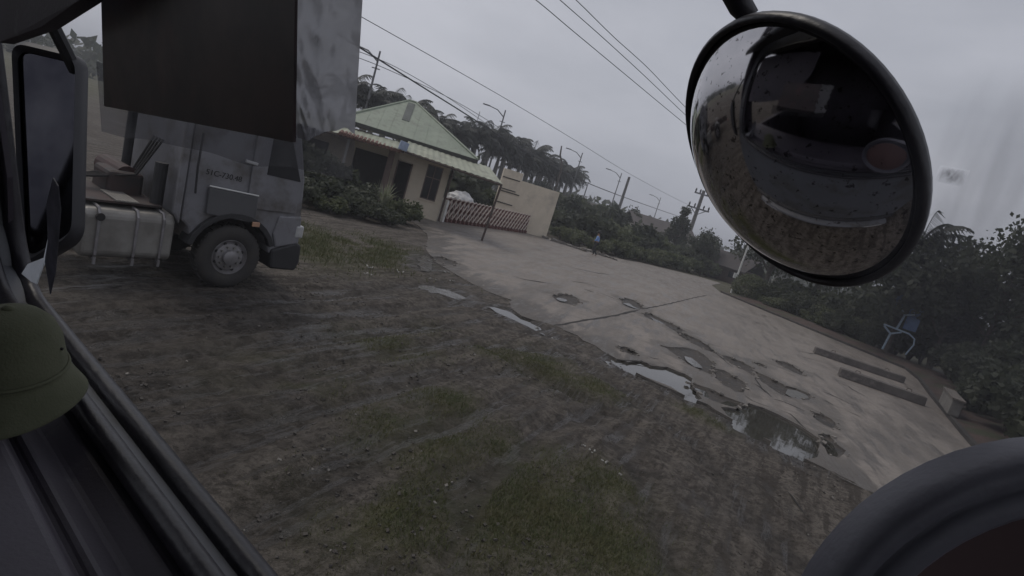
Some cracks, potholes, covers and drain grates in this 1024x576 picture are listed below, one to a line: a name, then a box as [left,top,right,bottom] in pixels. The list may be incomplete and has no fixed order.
pothole [772,359,807,376]
pothole [710,368,750,392]
pothole [816,431,851,458]
pothole [660,344,718,375]
pothole [552,293,583,306]
pothole [619,297,644,309]
pothole [615,344,640,356]
pothole [810,410,841,430]
pothole [755,371,815,400]
